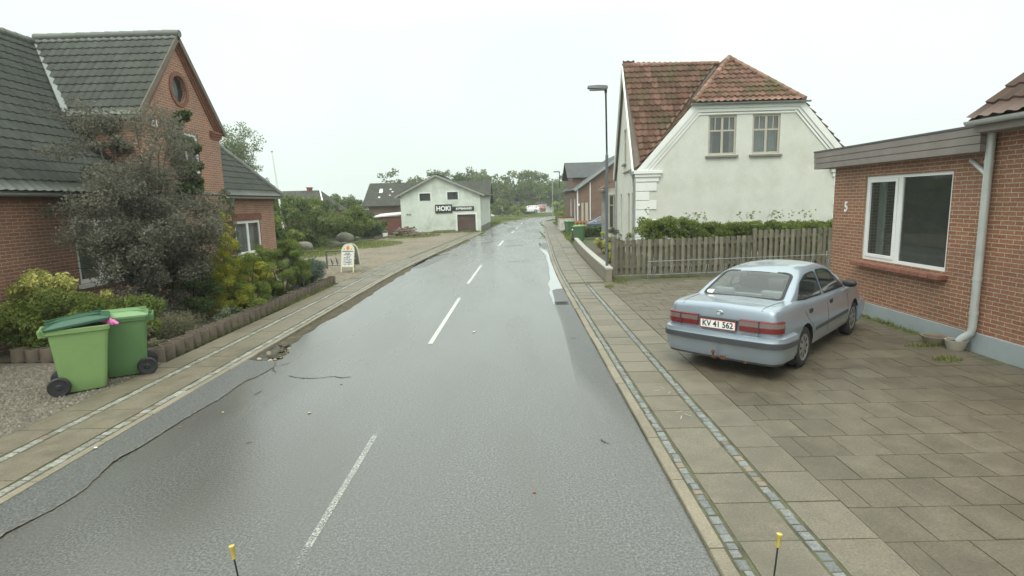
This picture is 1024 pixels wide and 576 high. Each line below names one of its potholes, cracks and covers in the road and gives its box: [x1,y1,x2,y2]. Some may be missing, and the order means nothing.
pothole [252,344,291,361]
crack [0,362,345,537]
